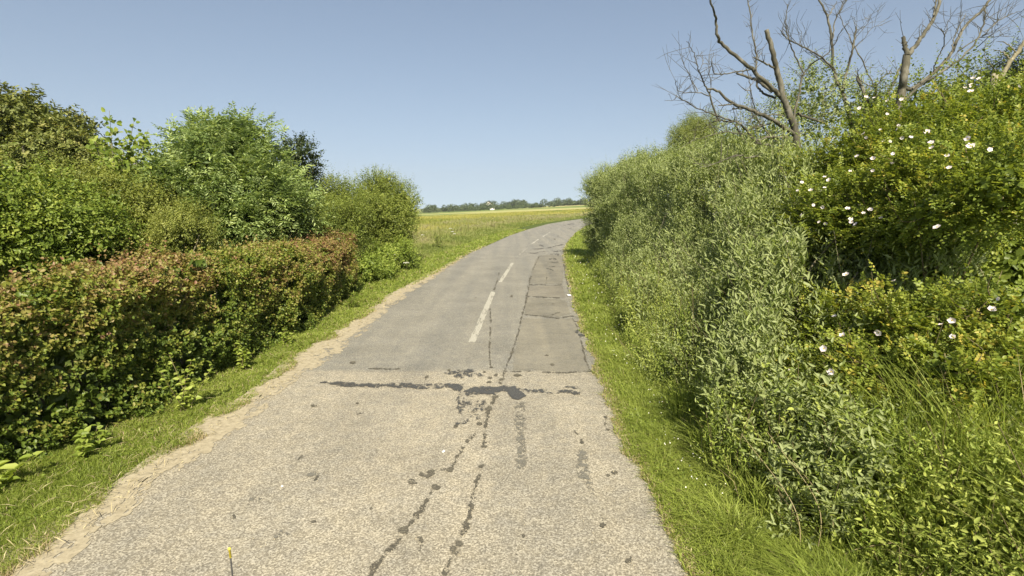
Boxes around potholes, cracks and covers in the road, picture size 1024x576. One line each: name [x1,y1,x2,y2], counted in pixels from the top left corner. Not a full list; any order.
crack [474,257,594,395]
crack [322,368,496,536]
crack [367,491,432,576]
